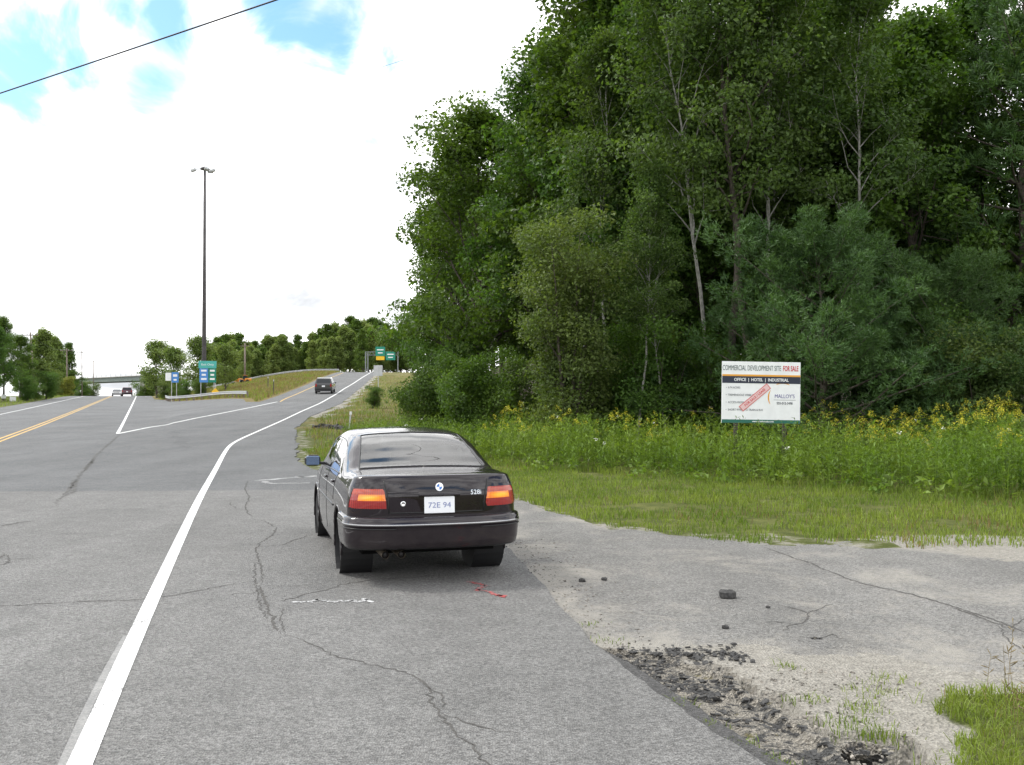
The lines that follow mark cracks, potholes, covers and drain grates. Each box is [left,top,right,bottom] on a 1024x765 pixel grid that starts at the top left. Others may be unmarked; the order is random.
pothole [596,642,849,765]
crack [768,548,1024,649]
pothole [831,741,896,765]
crack [0,483,520,765]
